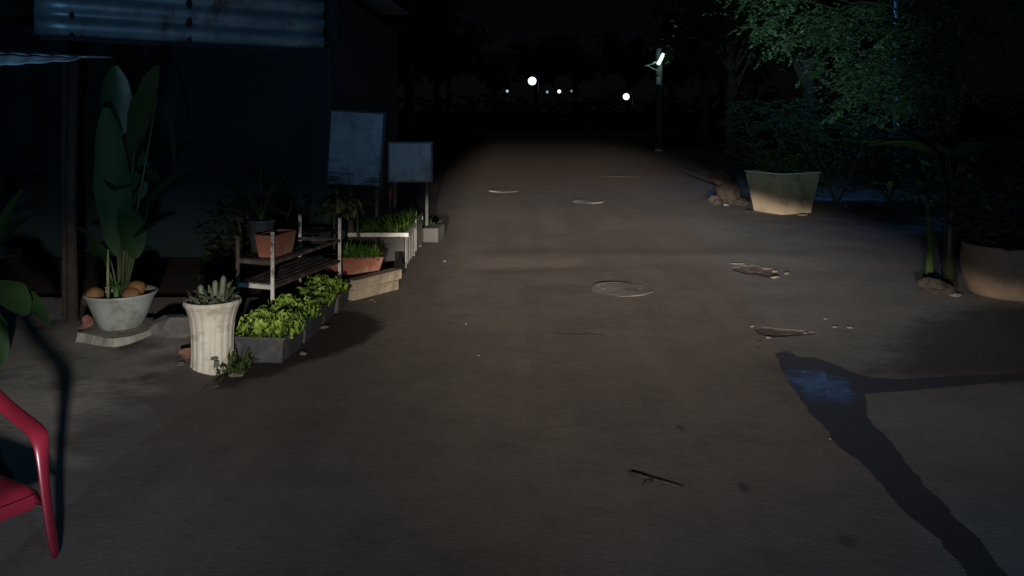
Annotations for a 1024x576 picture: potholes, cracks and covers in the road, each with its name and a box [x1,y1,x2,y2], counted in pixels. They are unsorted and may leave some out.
pothole [754,326,817,337]
manhole cover [592,282,653,297]
pothole [730,265,779,277]
